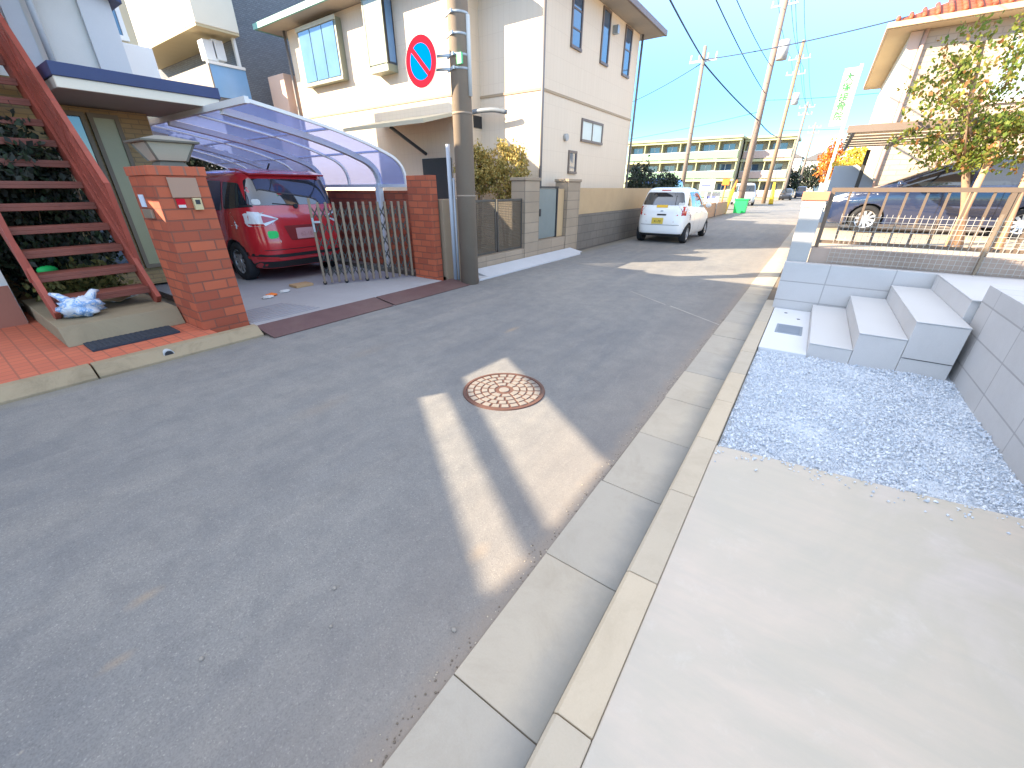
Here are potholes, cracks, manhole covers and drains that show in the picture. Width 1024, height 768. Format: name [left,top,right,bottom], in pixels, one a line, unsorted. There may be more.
manhole cover [463,373,545,411]
